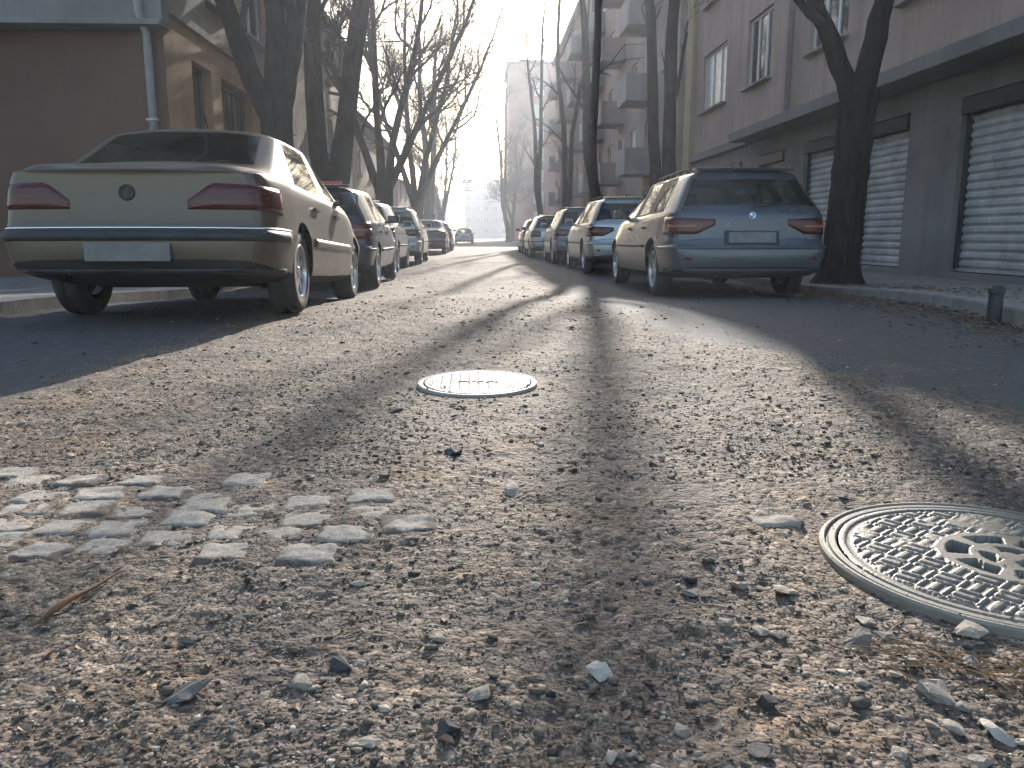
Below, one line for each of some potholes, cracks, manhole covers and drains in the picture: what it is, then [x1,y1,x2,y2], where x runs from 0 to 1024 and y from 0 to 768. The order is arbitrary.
manhole cover [417,370,537,397]
manhole cover [818,502,1024,640]
